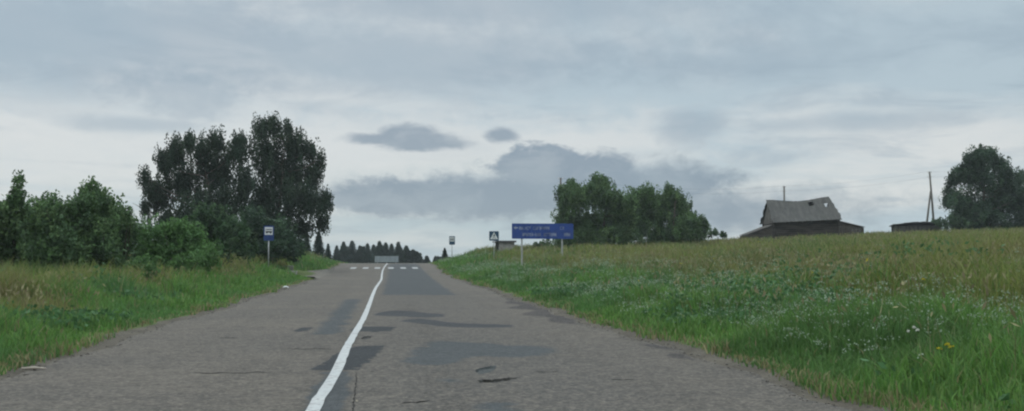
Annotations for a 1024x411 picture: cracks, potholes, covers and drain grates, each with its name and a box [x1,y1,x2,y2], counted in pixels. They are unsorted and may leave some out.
pothole [475,365,497,374]
